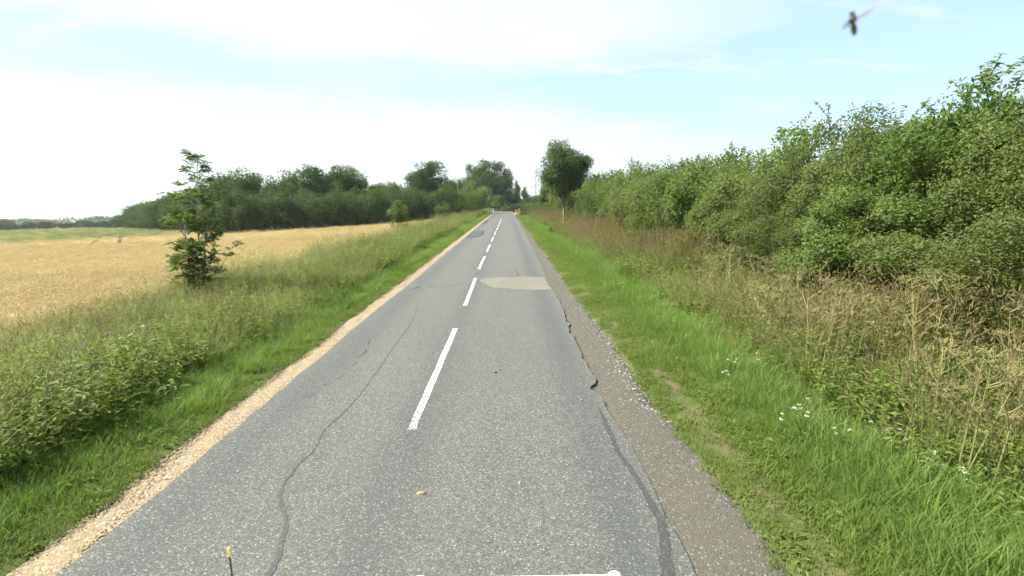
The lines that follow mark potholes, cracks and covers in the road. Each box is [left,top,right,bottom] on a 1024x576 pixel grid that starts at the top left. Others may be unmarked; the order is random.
crack [265,284,459,576]
